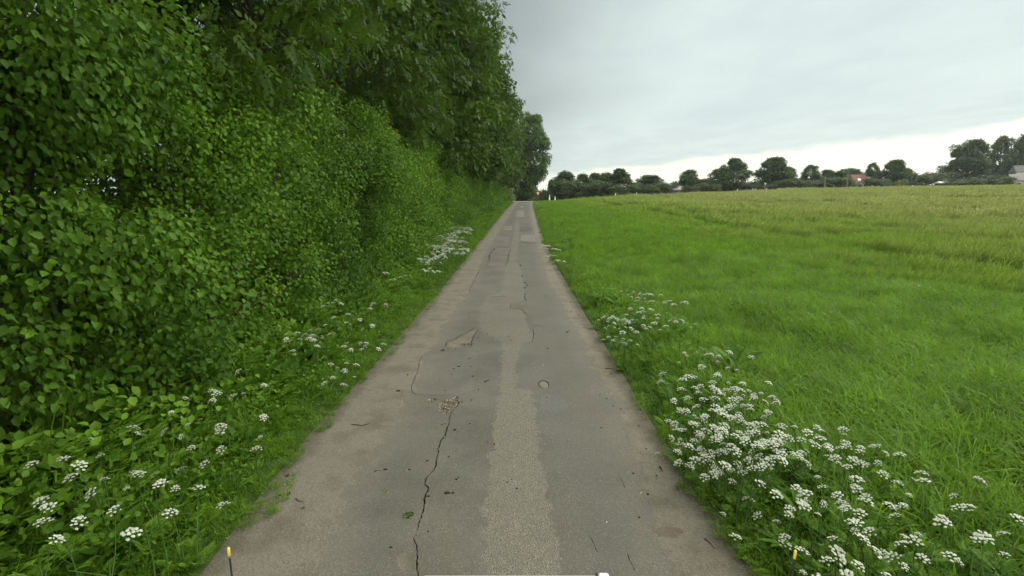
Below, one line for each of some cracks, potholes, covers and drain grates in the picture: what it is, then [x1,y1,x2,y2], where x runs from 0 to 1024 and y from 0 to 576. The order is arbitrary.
crack [411,356,452,576]
pothole [439,396,460,414]
